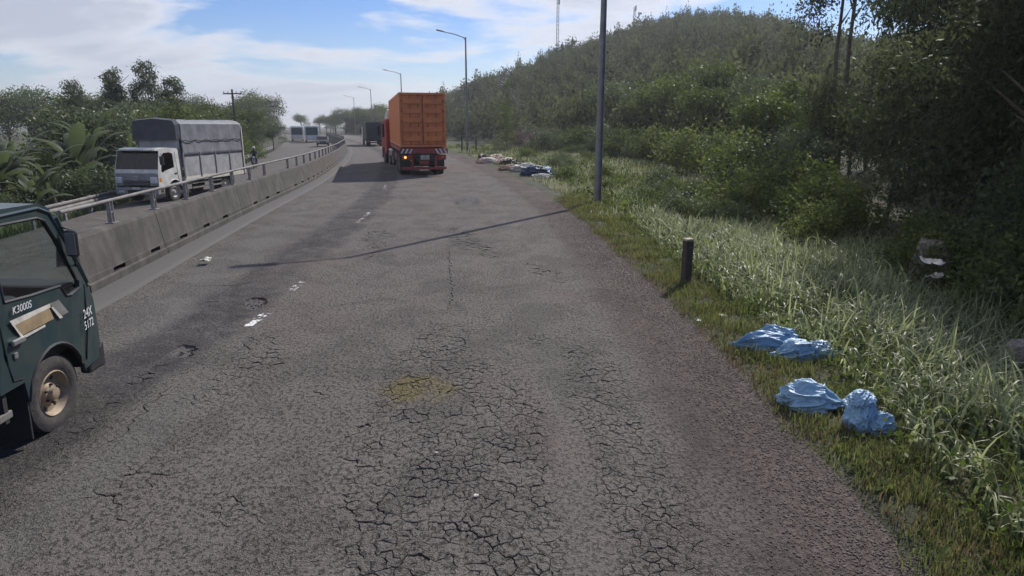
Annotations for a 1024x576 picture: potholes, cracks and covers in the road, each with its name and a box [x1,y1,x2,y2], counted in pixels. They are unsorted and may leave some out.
pothole [170,344,198,358]
crack [41,226,717,576]
pothole [243,297,268,310]
